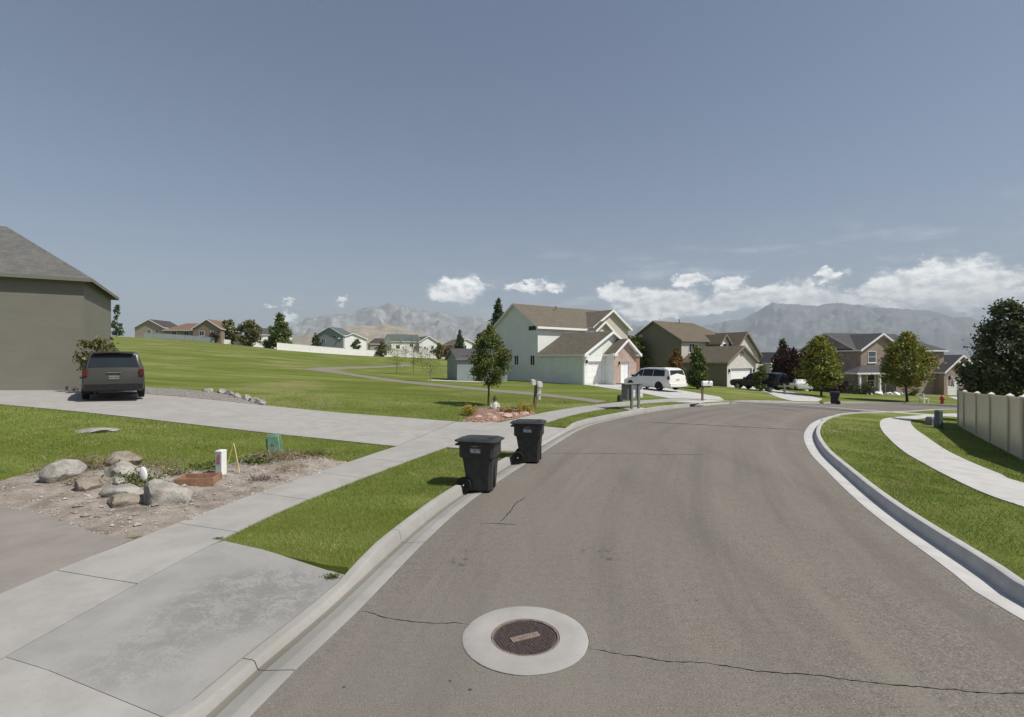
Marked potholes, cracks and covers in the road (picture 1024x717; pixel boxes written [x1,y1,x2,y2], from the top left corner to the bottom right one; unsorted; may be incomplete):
manhole cover [462,606,589,676]
crack [591,648,1024,694]
crack [360,611,468,625]
